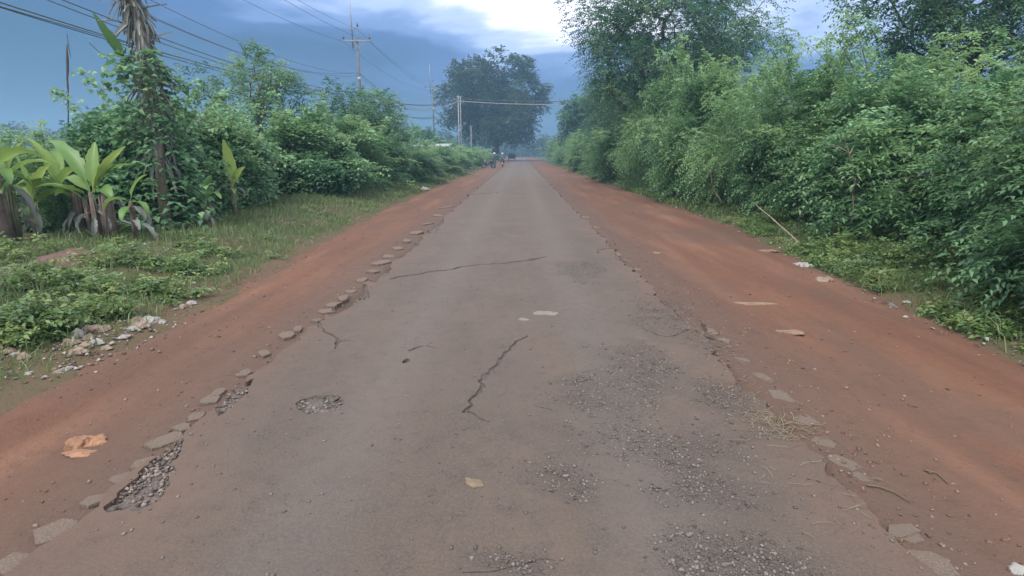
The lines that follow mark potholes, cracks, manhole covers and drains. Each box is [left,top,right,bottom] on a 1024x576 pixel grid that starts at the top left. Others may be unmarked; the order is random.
pothole [215,385,251,416]
crack [317,321,353,349]
pothole [295,395,344,414]
crack [391,256,546,279]
pothole [345,285,370,310]
pothole [105,438,184,512]
crack [462,336,553,422]
